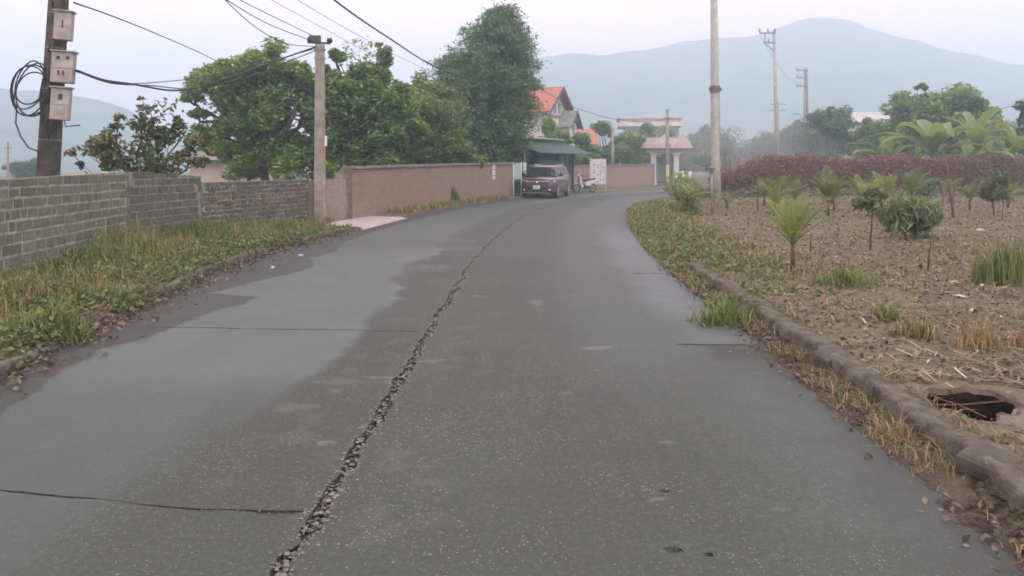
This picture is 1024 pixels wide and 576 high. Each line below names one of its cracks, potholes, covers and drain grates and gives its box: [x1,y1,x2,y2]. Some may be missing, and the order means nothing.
crack [0,194,631,576]
pothole [648,540,699,560]
